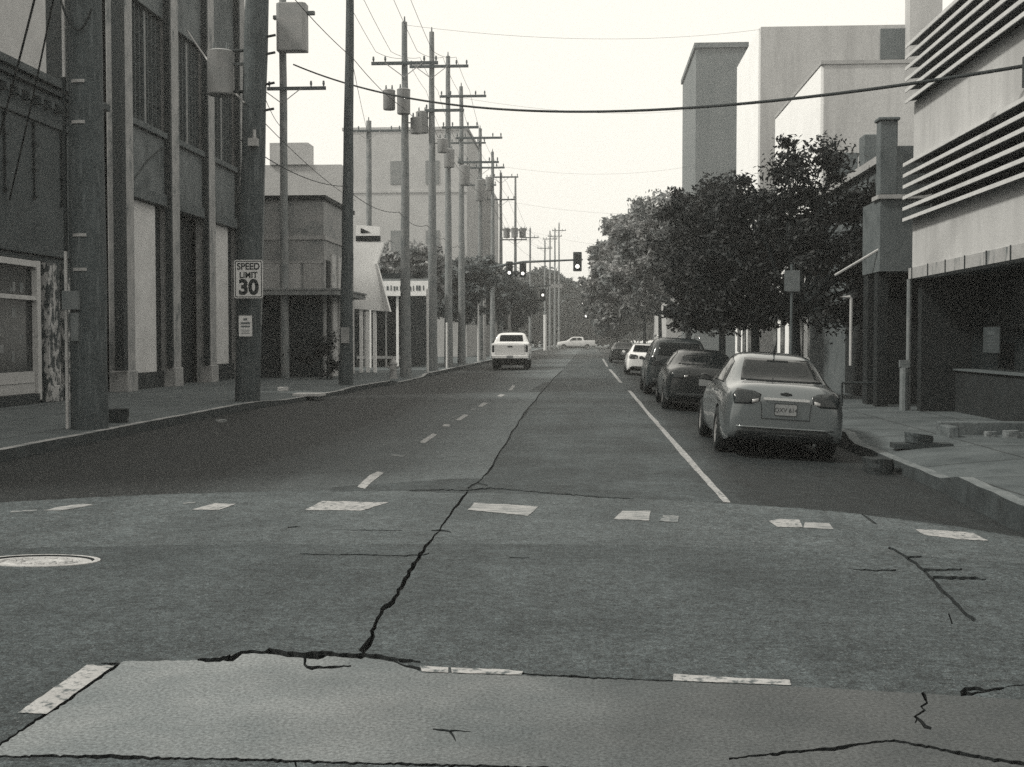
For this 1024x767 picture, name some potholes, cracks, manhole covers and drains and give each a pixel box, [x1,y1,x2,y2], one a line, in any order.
manhole cover [0,554,101,567]
crack [197,371,673,682]
crack [960,684,1024,696]
crack [853,547,986,624]
crack [729,692,1024,766]
